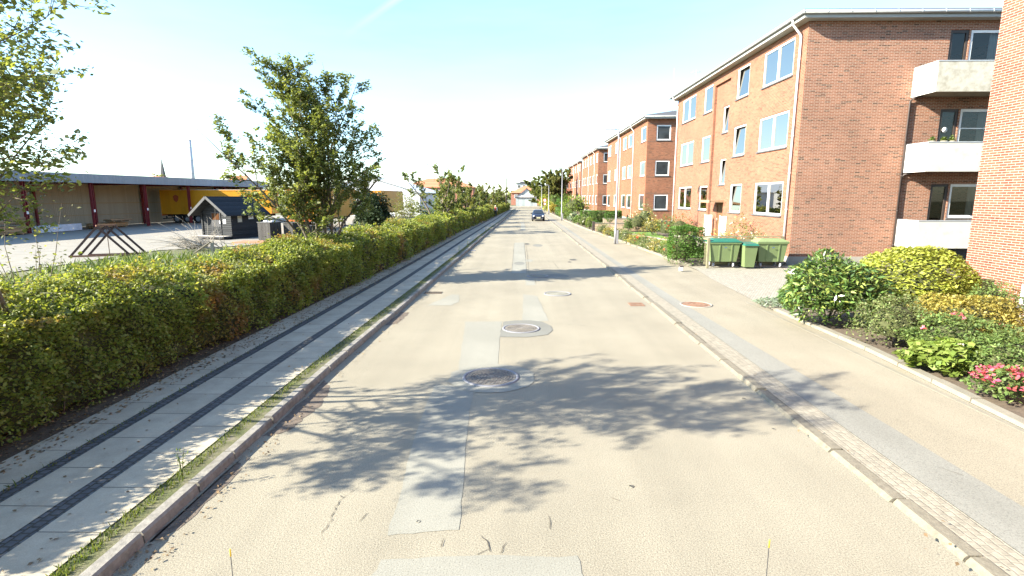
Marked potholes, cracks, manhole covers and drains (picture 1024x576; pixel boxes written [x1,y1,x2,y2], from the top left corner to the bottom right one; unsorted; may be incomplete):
manhole cover [502,324,540,333]
manhole cover [462,368,519,387]
